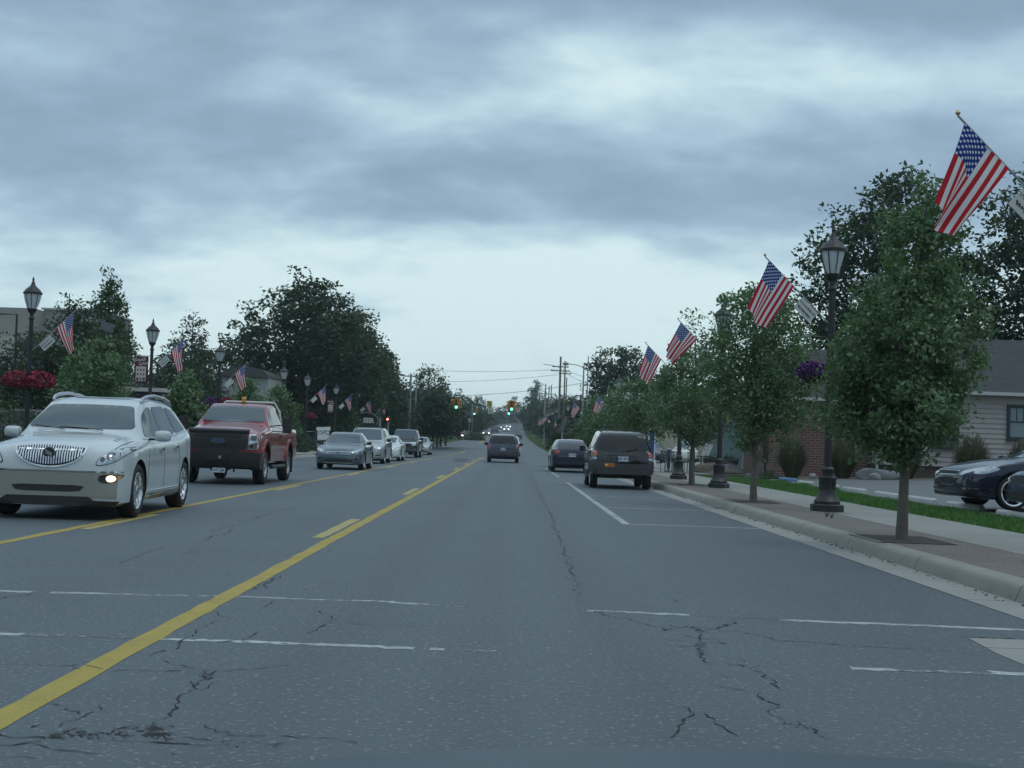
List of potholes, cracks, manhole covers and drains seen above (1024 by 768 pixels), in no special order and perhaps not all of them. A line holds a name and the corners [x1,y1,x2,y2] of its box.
crack [595,611,969,739]
crack [0,611,358,759]
crack [534,480,592,608]
